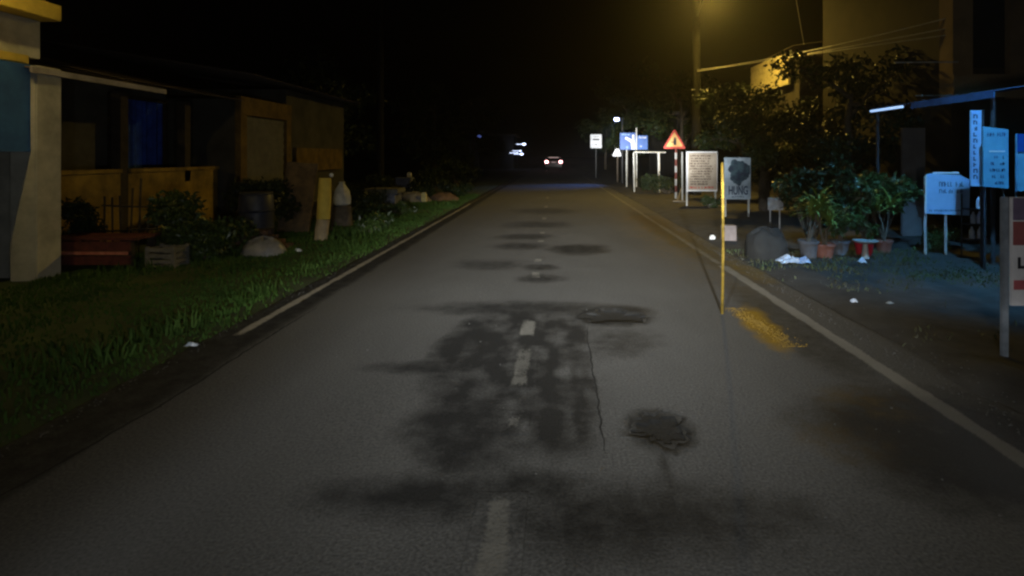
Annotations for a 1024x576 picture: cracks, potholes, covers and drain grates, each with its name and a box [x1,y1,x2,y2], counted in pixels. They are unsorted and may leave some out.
crack [587,329,605,451]
pothole [574,307,656,324]
pothole [617,406,700,458]
